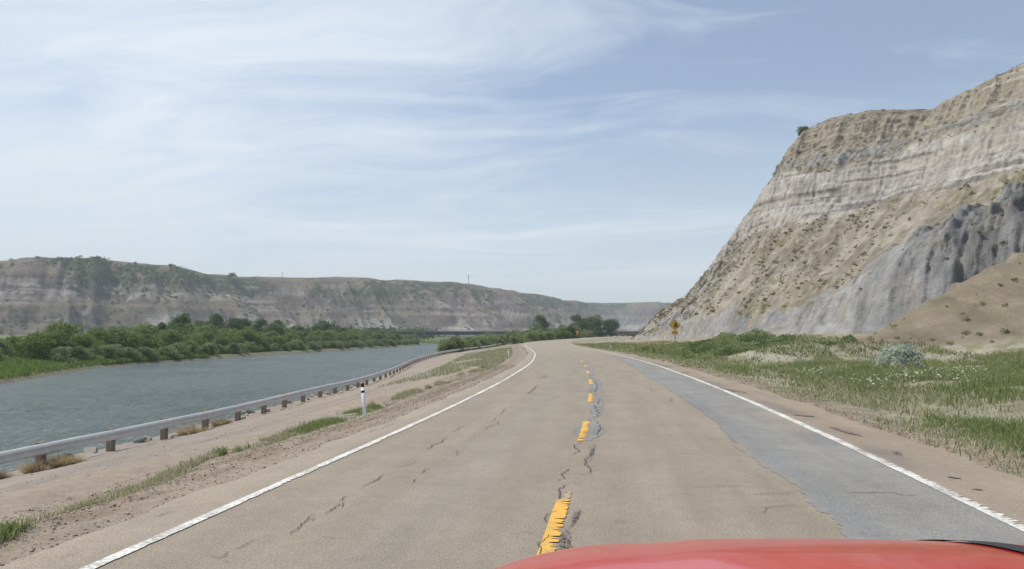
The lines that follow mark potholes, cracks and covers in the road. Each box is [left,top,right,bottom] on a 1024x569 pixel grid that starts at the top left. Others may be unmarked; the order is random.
crack [526,382,602,553]
